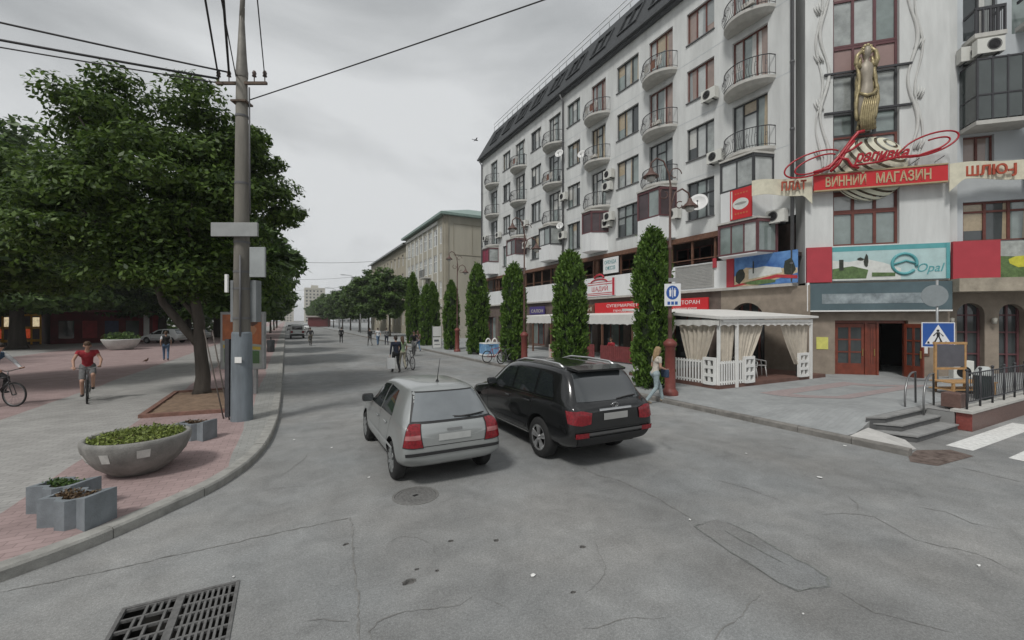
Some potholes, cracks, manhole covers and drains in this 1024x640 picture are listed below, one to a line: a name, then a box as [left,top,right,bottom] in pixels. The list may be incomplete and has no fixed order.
crack [368,594,507,640]
crack [824,500,1019,575]
manhole cover [392,486,439,506]
drain grate [105,580,240,640]
crack [714,594,761,640]
